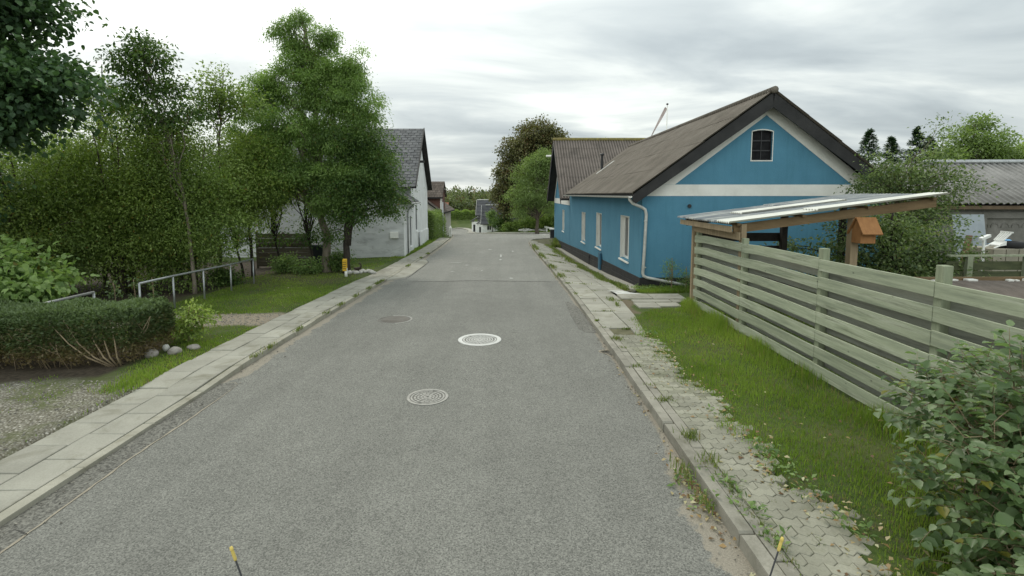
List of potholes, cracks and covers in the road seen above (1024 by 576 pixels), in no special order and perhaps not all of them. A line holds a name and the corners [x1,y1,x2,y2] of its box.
manhole cover [378,315,413,323]
manhole cover [407,389,448,406]
manhole cover [458,333,501,346]
